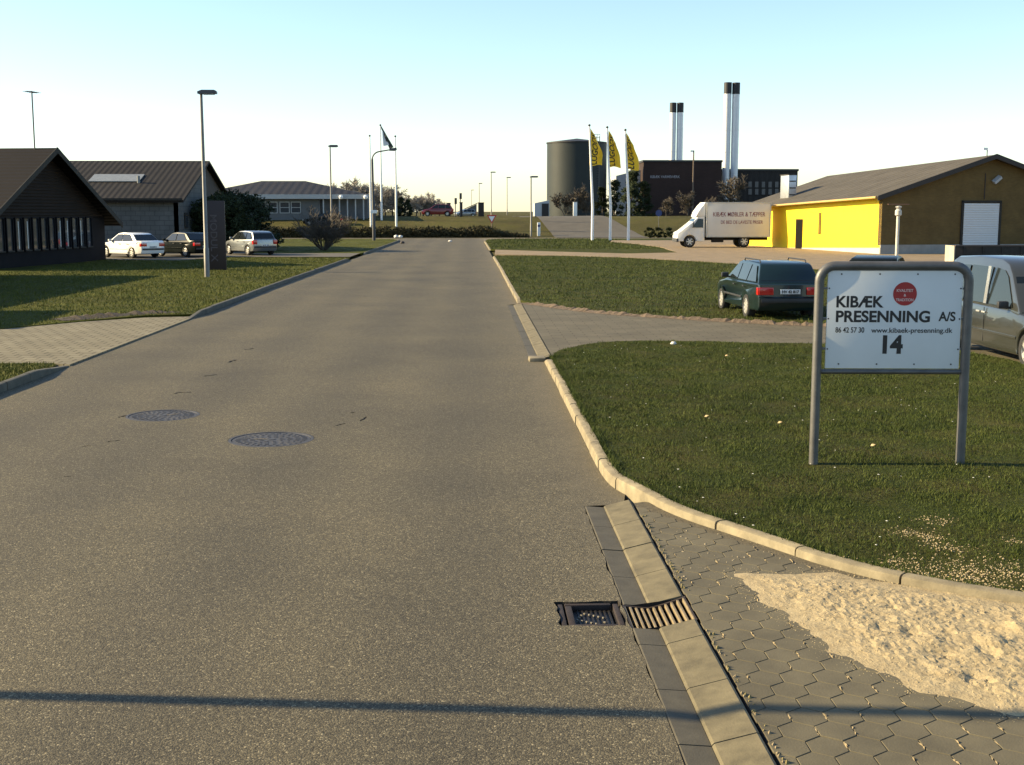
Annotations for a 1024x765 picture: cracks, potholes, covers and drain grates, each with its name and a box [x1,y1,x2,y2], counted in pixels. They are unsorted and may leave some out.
drain grate [622,596,698,630]
manhole cover [228,432,314,447]
manhole cover [125,410,200,421]
